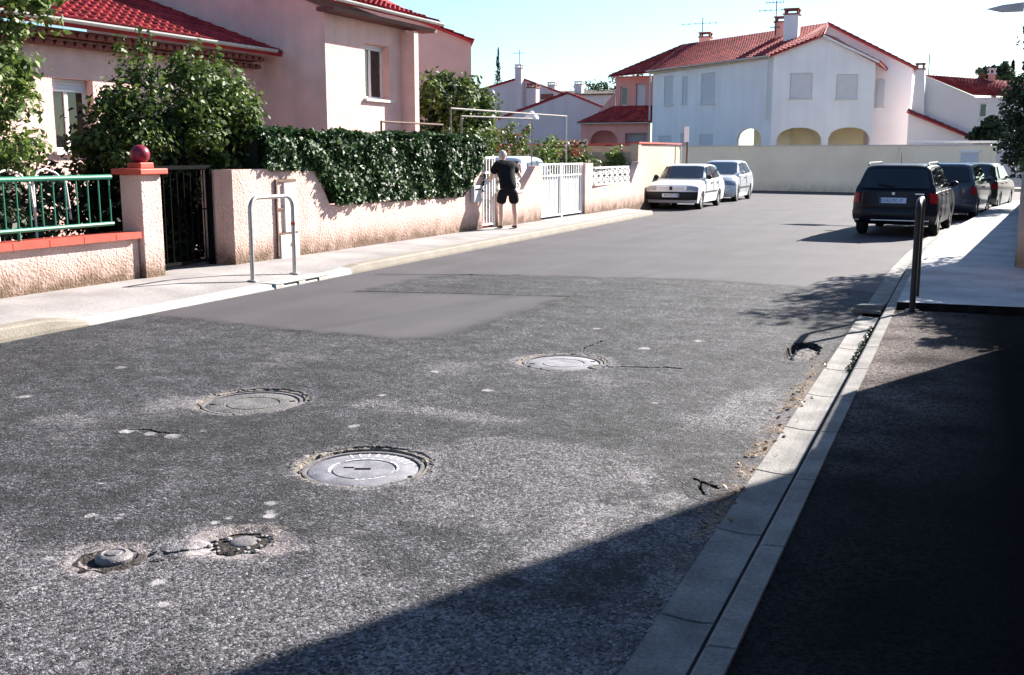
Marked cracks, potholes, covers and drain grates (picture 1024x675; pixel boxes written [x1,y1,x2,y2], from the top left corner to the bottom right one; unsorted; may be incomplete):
manhole cover [517,353,612,371]
crack [568,339,695,371]
crack [132,541,221,563]
manhole cover [193,387,310,415]
manhole cover [289,445,437,488]
utility cover [206,531,275,556]
pothole [767,339,837,363]
crack [675,473,736,502]
crack [113,426,194,438]
utility cover [72,548,146,574]
